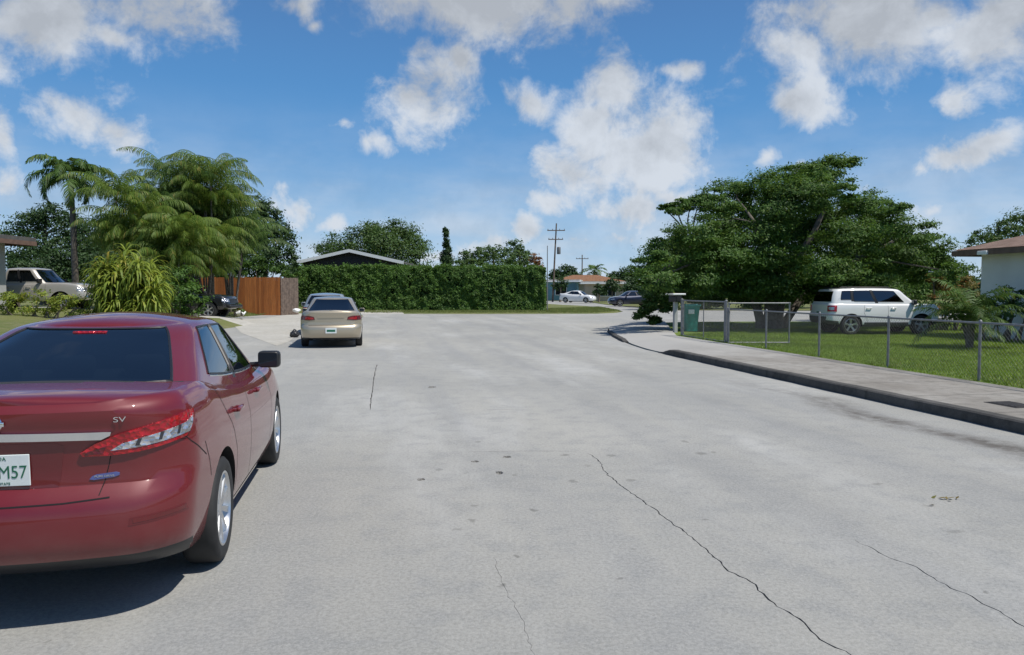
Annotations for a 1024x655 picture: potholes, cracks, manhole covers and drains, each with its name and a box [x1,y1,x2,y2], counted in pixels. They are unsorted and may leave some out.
crack [587,453,851,655]
crack [855,540,1023,626]
